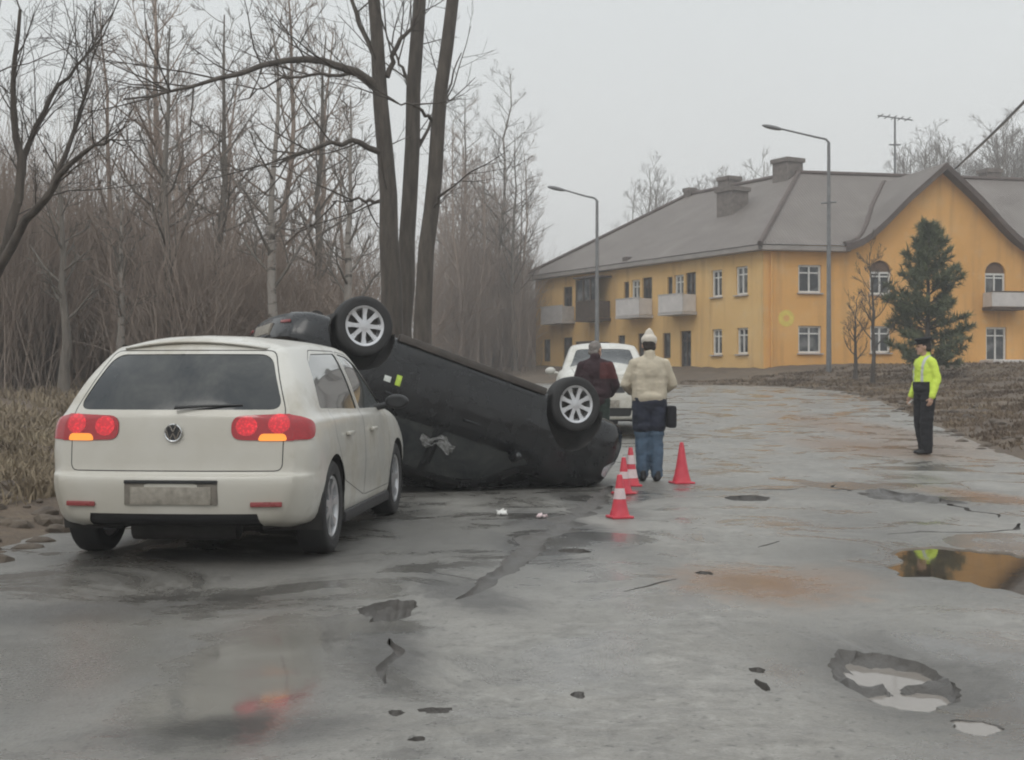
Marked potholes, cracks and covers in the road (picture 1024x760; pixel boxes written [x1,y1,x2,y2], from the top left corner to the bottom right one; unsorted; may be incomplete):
pothole [885,546,1024,595]
pothole [828,649,962,712]
crack [376,639,406,684]
crack [623,579,675,592]
pothole [950,719,1005,736]
pothole [754,679,770,691]
crack [891,523,1020,534]
pothole [358,599,418,623]
